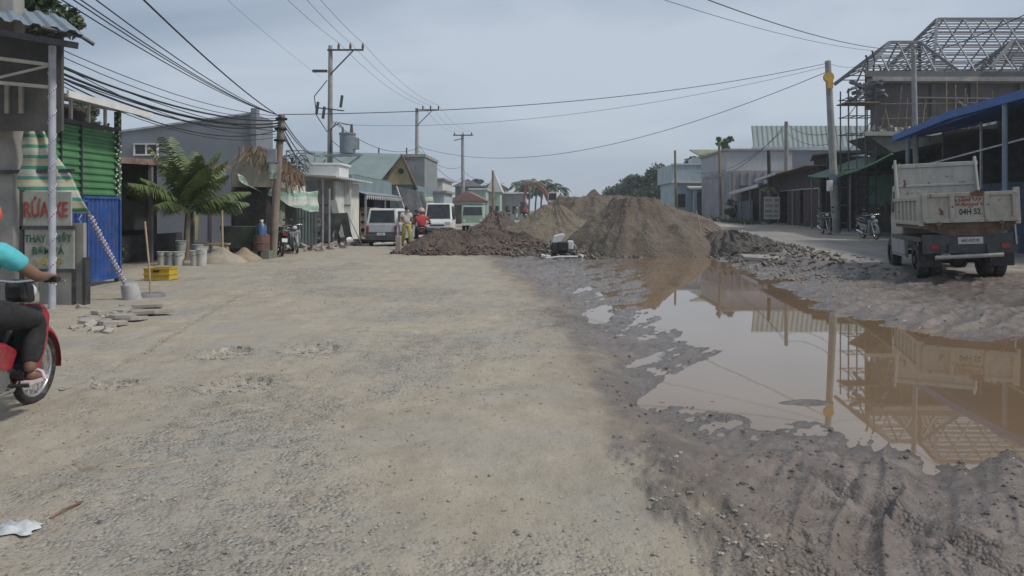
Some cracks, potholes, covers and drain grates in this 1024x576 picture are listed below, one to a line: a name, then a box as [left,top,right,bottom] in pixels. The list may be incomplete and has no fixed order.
pothole [277,342,342,356]
pothole [195,345,256,360]
pothole [89,378,142,389]
pothole [194,374,280,396]
